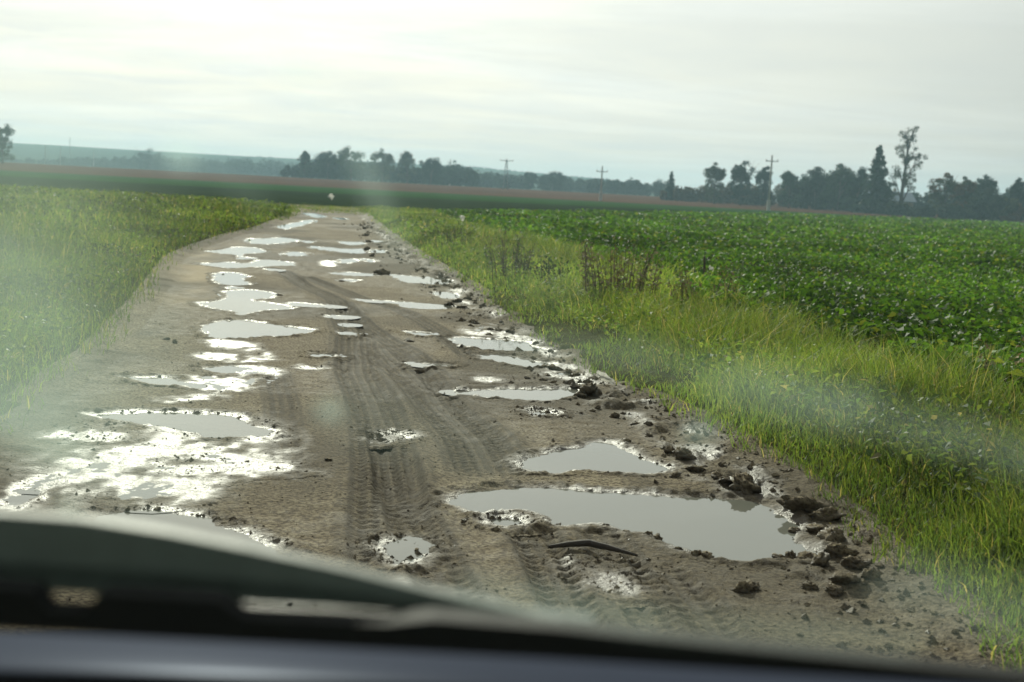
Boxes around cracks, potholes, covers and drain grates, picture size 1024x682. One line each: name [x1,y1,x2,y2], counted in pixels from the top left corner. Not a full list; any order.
pothole [352,426,432,449]
pothole [455,323,550,345]
pothole [0,440,332,514]
pothole [513,405,575,418]
pothole [279,301,352,313]
pothole [436,334,560,352]
pothole [185,289,302,317]
pothole [146,366,292,405]
pothole [432,384,589,404]
pothole [496,436,691,478]
pothole [201,246,271,260]
